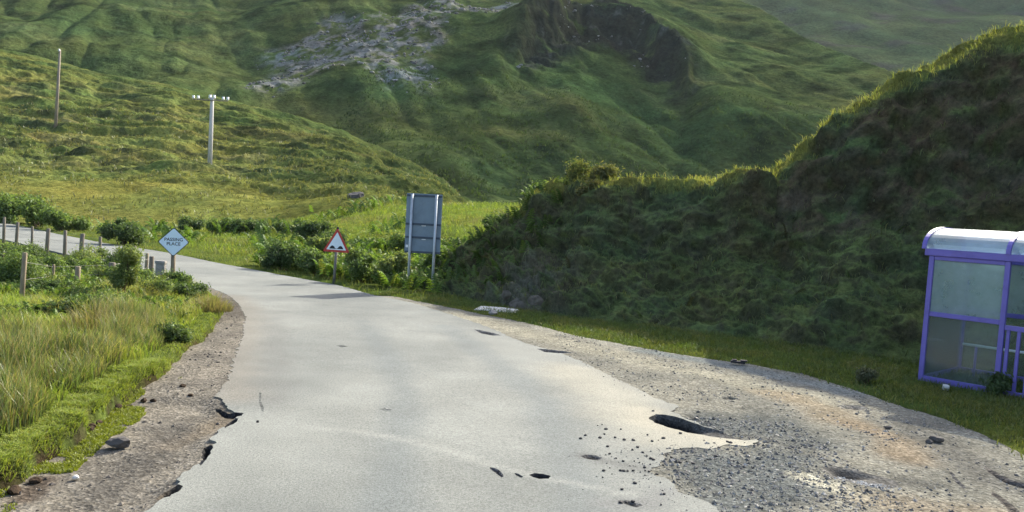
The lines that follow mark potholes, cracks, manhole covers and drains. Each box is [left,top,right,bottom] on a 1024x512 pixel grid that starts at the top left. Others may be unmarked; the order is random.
crack [215,392,264,419]
pothole [649,414,744,440]
pothole [199,445,213,465]
pothole [155,484,183,500]
